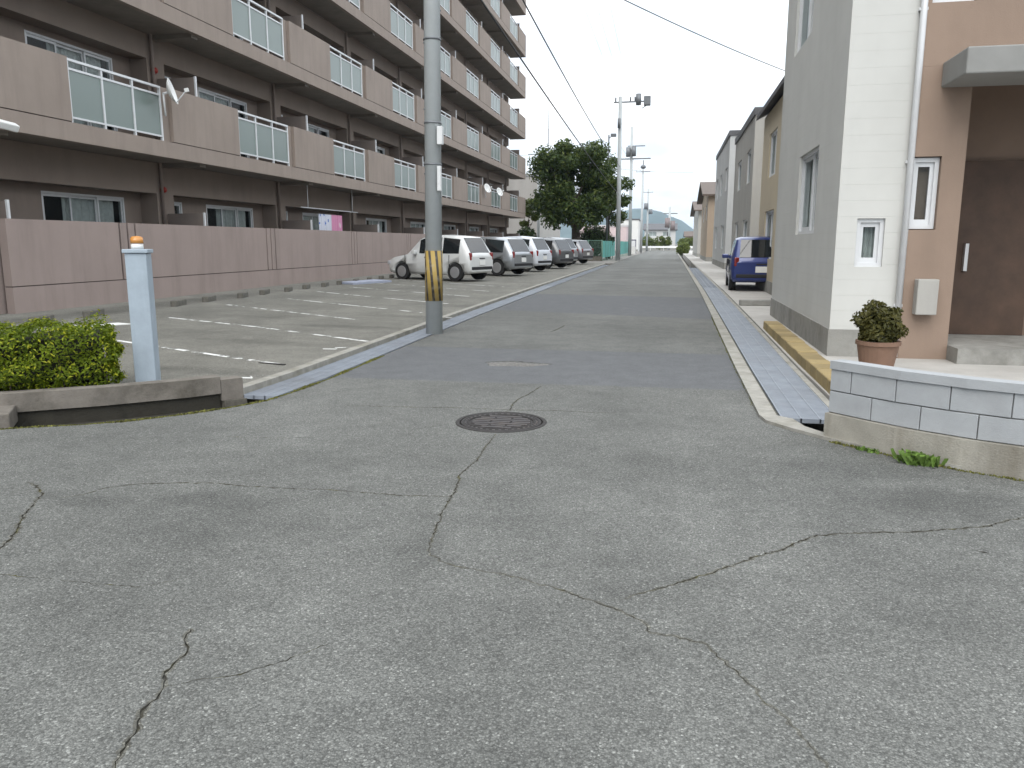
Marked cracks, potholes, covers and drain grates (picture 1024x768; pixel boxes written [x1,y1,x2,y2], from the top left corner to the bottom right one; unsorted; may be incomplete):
crack [0,485,44,549]
crack [632,517,1024,596]
crack [61,435,825,762]
manhole cover [455,412,547,433]
crack [379,386,593,413]
